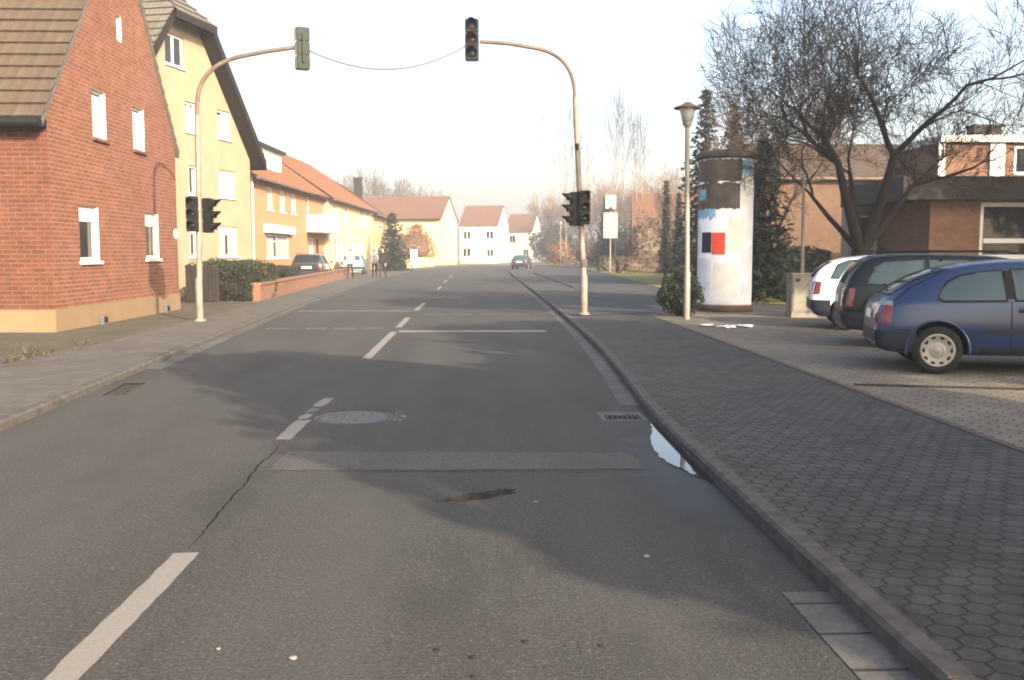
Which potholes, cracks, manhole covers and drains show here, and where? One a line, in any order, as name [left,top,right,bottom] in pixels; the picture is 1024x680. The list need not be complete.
drain grate [597,412,648,421]
manhole cover [312,410,406,424]
drain grate [104,383,145,395]
pothole [435,487,516,503]
crack [187,445,278,549]
